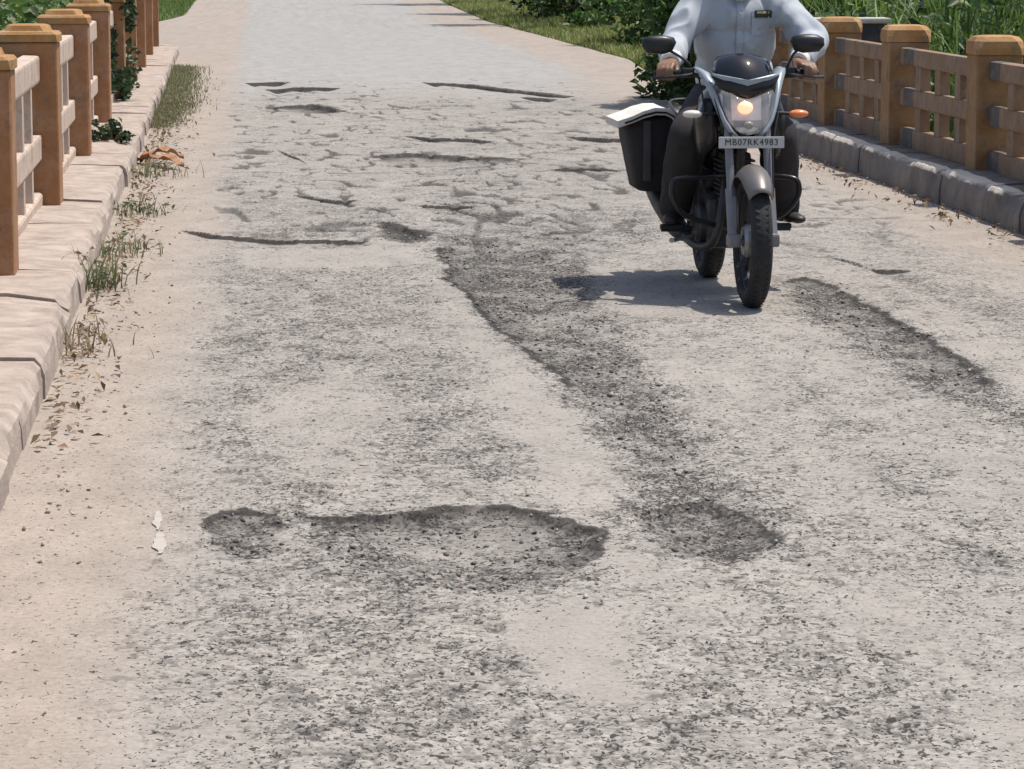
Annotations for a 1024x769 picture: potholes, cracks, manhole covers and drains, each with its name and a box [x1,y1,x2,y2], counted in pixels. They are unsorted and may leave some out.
crack [423,82,574,102]
crack [246,82,340,94]
crack [276,149,306,163]
crack [418,204,477,212]
pothole [283,504,608,594]
crack [183,230,370,246]
pothole [197,507,301,564]
crack [297,195,356,206]
crack [405,136,496,144]
pothole [626,499,785,567]
